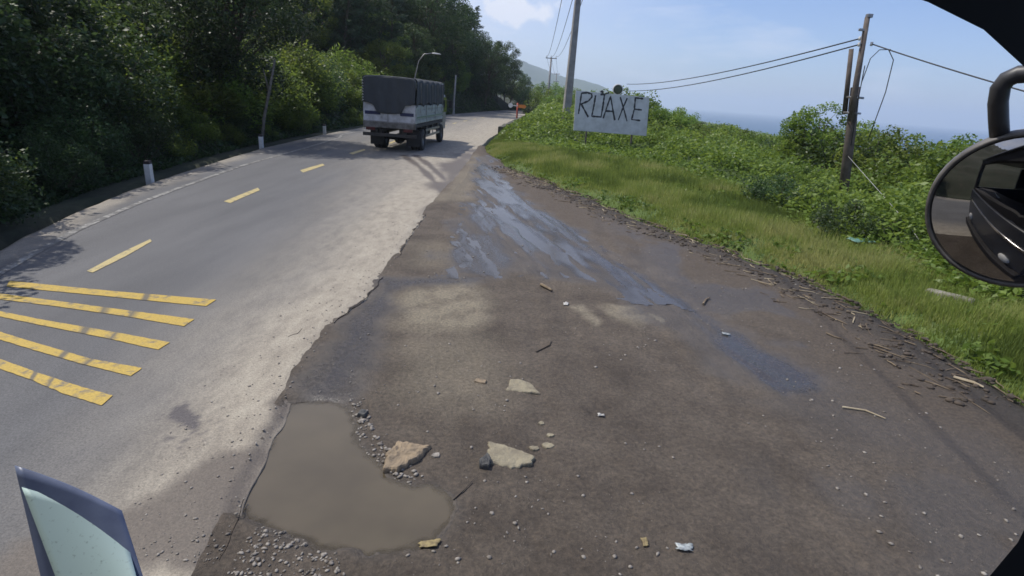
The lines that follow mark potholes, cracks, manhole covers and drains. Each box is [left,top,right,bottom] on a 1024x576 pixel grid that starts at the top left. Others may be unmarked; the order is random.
pothole [243,400,459,558]
